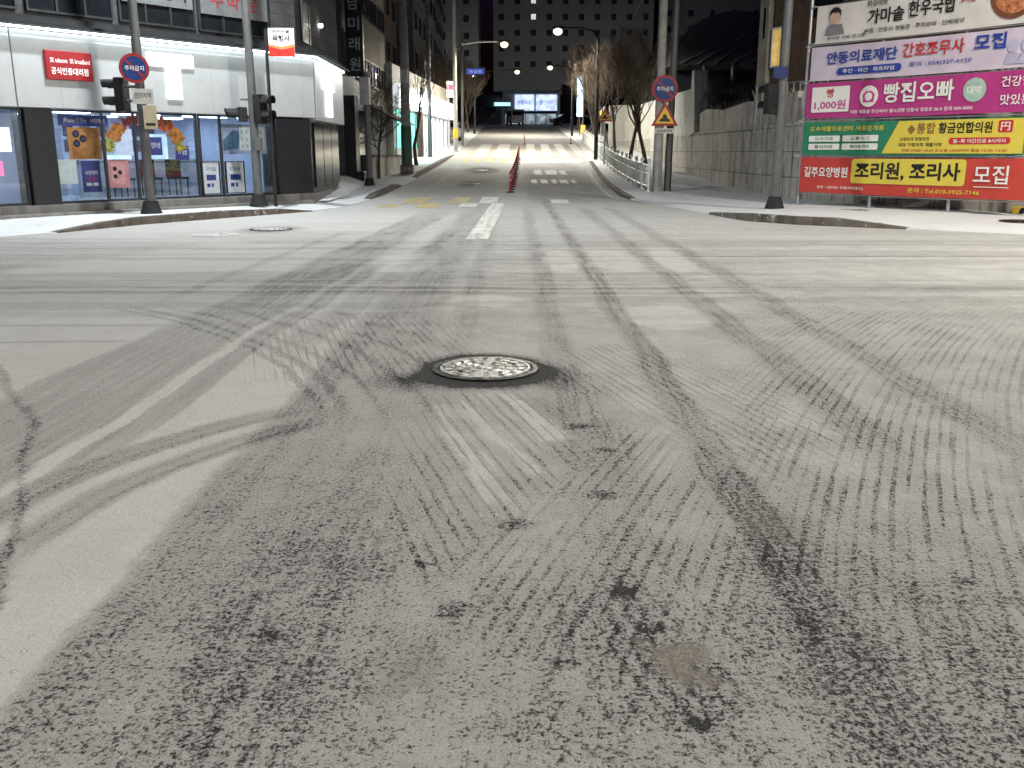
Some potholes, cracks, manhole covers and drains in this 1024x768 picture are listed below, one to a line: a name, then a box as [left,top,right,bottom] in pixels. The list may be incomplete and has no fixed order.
manhole cover [432,356,538,382]
